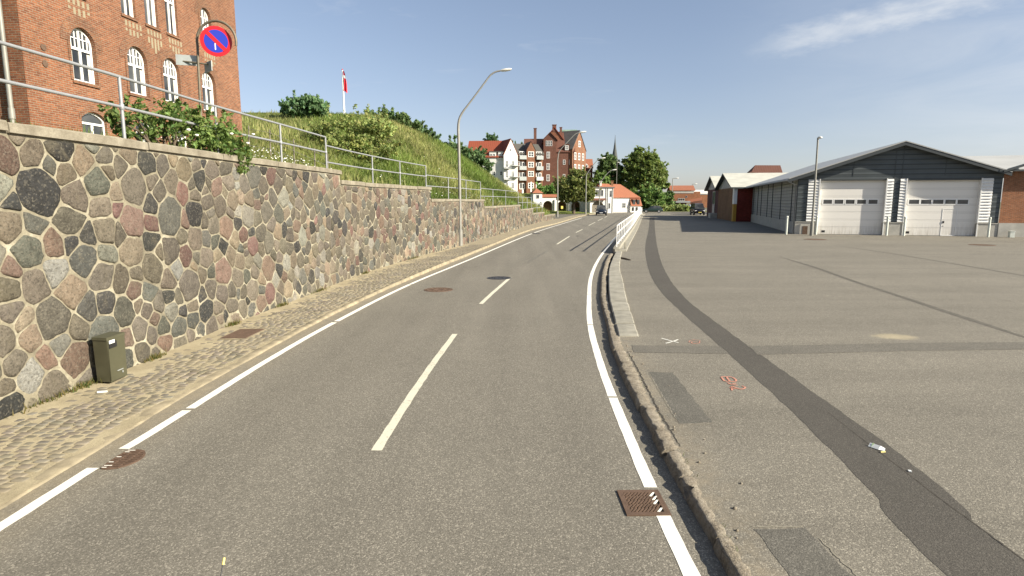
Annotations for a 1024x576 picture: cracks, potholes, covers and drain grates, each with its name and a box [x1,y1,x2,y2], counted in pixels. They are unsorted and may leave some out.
utility cover [218,329,266,339]
drain grate [617,490,672,516]
